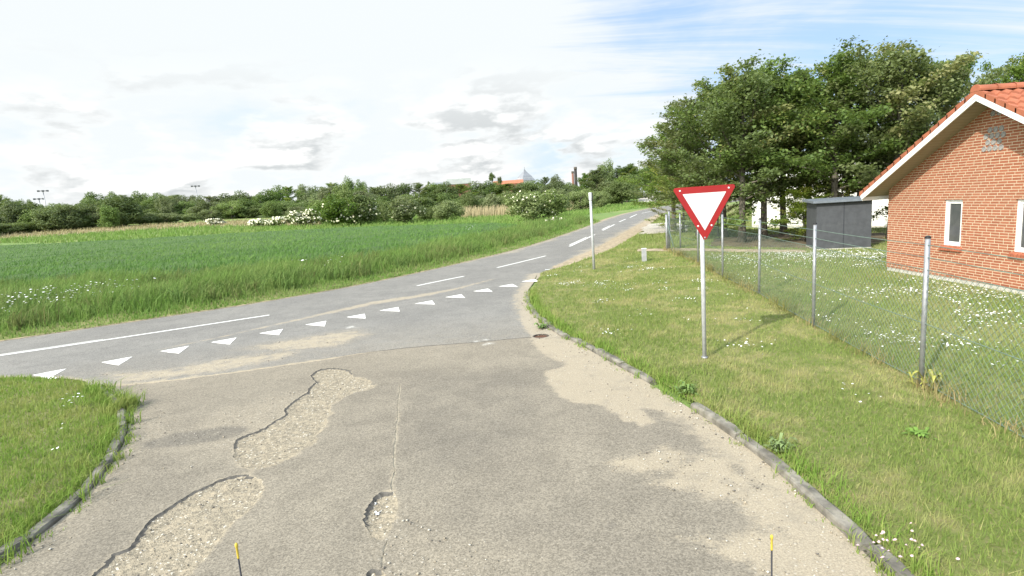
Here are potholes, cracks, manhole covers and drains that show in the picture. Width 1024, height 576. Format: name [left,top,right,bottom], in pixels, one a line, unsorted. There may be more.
pothole [233,368,376,469]
pothole [92,475,264,576]
pothole [362,492,398,540]
